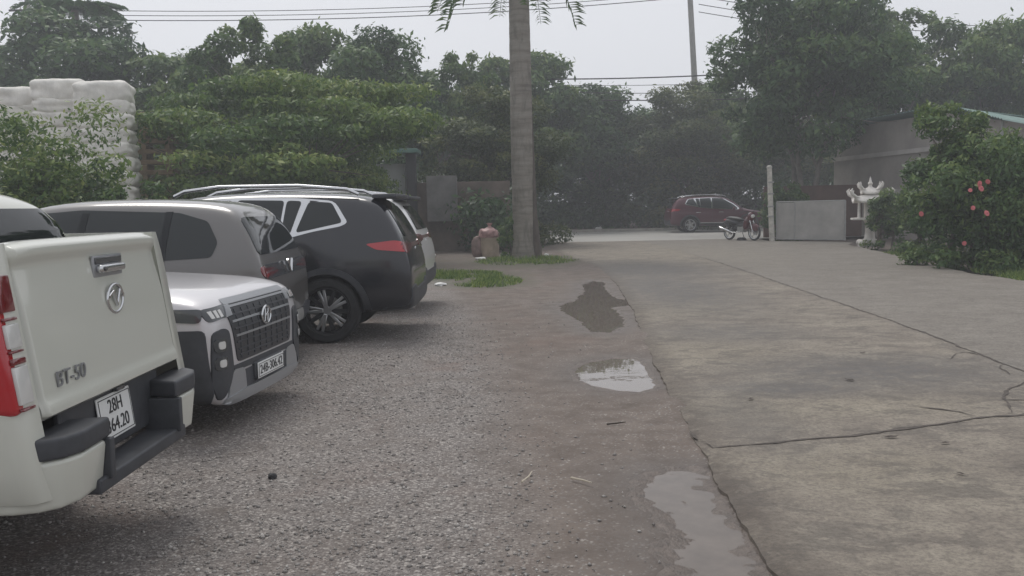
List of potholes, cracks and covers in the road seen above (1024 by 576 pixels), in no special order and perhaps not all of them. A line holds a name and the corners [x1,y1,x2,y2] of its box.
crack [689,382,1024,447]
